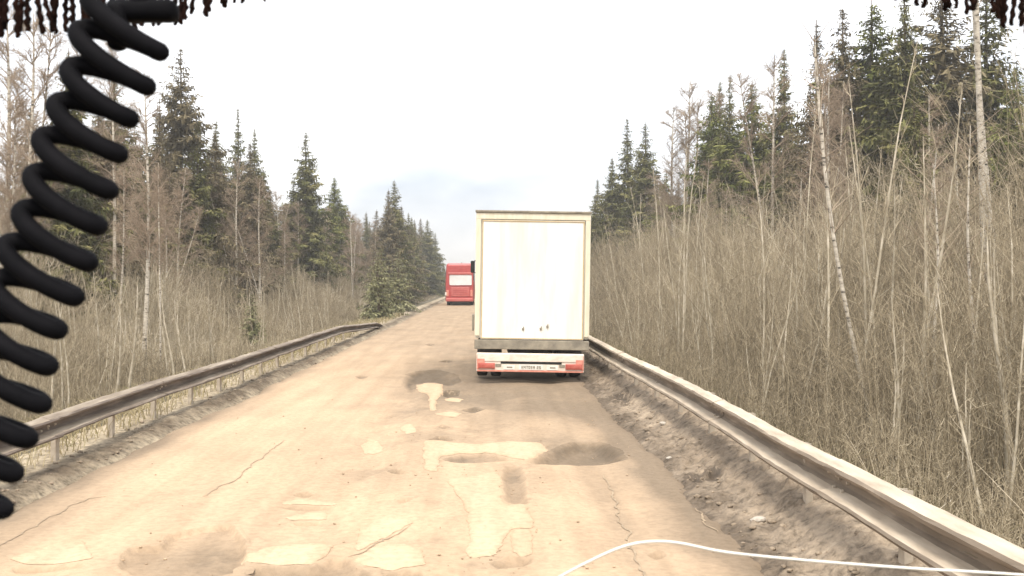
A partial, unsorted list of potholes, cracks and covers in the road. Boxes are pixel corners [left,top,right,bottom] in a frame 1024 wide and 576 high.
pothole [441,390,464,398]
crack [206,440,284,496]
pothole [520,441,634,467]
pothole [396,369,465,394]
crack [0,496,105,545]
pothole [439,453,521,464]
pothole [498,465,536,506]
pothole [456,407,490,415]
crack [603,473,646,576]
pothole [110,523,255,576]
